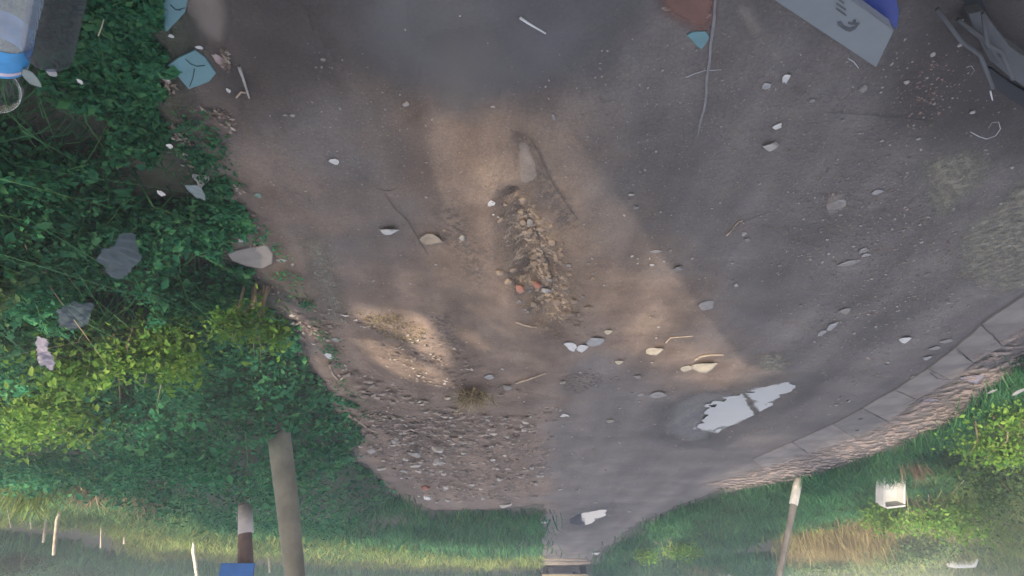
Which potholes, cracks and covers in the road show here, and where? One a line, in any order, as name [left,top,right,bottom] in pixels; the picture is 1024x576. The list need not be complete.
pothole [503,187,573,325]
